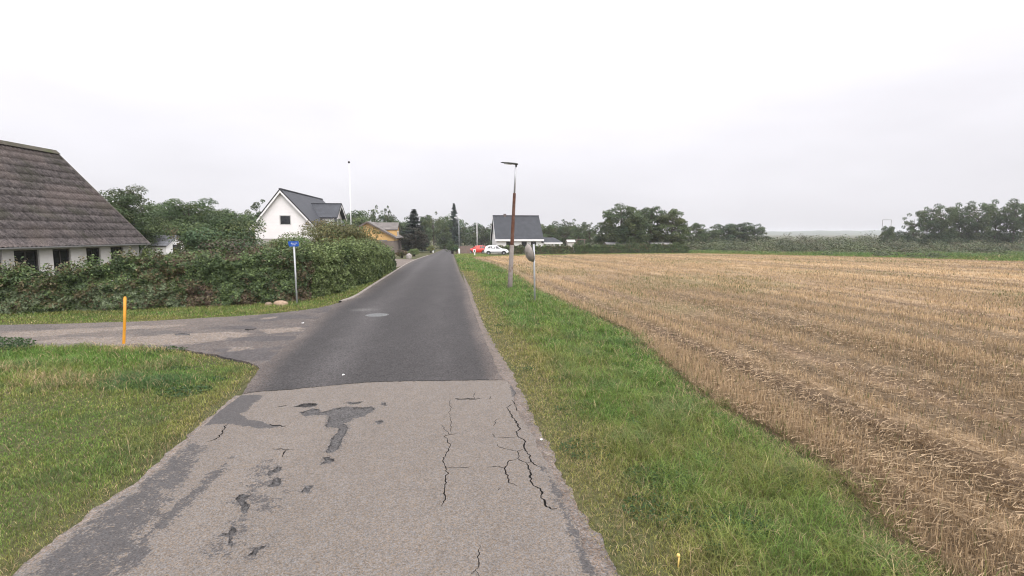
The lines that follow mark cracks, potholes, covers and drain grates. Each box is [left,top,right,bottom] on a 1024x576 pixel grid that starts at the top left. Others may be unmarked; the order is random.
pothole [235,494,251,514]
crack [441,393,557,510]
pothole [300,407,375,453]
pothole [217,526,237,547]
